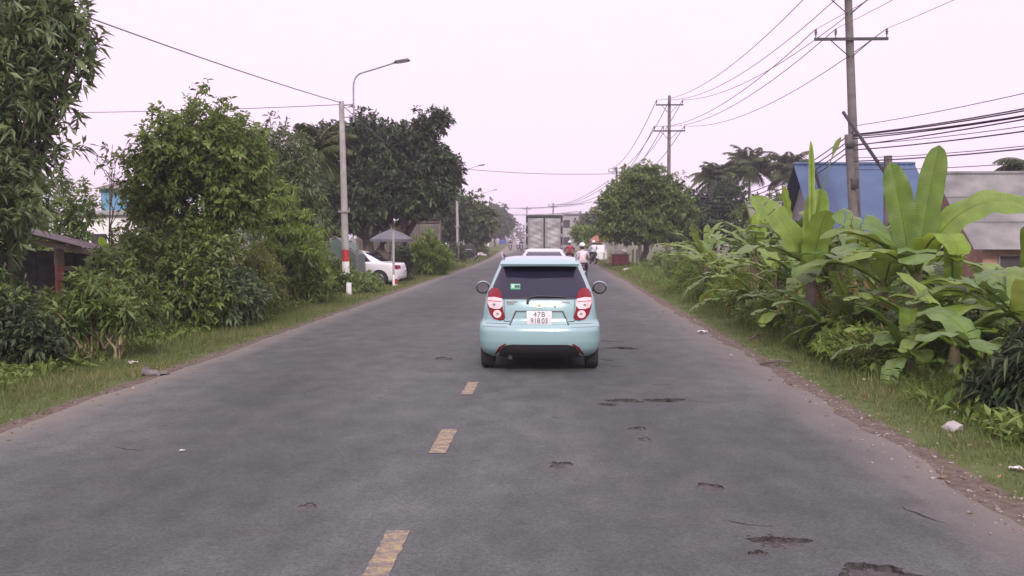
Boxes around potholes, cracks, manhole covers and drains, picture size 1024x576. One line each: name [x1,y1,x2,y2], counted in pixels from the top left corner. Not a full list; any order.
crack [903,507,945,523]
pothole [548,461,573,469]
pothole [838,562,924,576]
pothole [746,533,813,548]
pothole [697,482,724,492]
